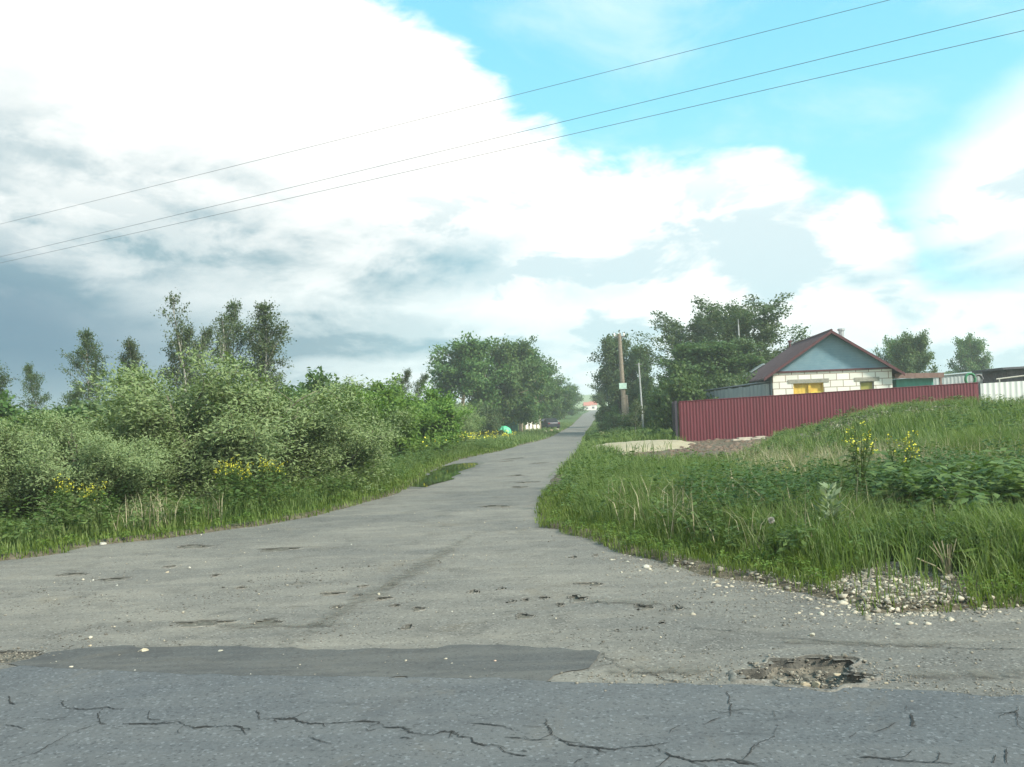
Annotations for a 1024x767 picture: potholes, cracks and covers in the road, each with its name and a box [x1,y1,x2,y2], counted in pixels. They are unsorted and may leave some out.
crack [862,750,953,764]
pothole [567,593,589,603]
crack [994,705,1024,729]
crack [6,700,778,767]
pothole [727,653,884,692]
